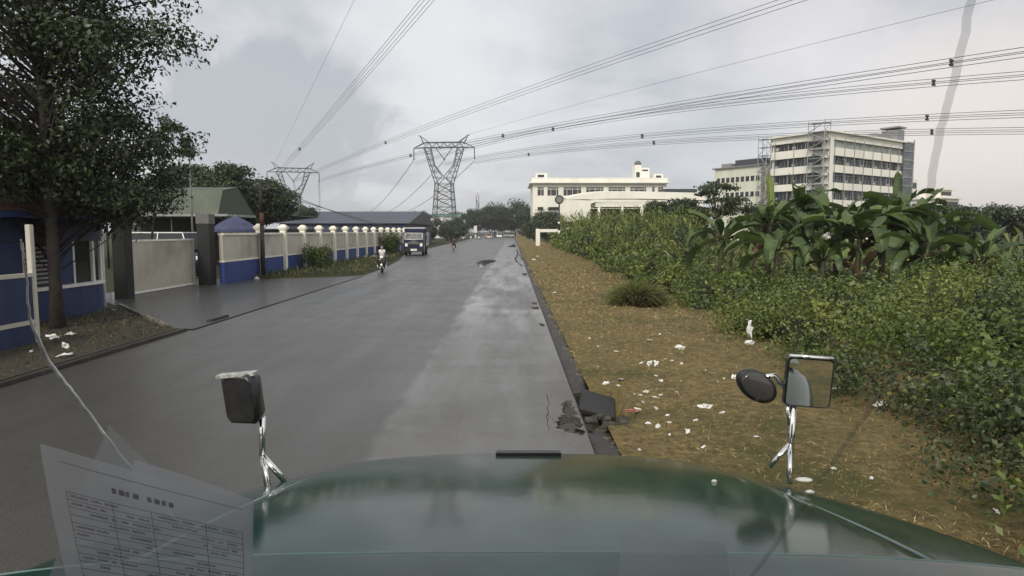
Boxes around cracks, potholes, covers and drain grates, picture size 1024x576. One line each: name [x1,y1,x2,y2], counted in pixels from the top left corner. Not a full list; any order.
pothole [556,399,586,435]
